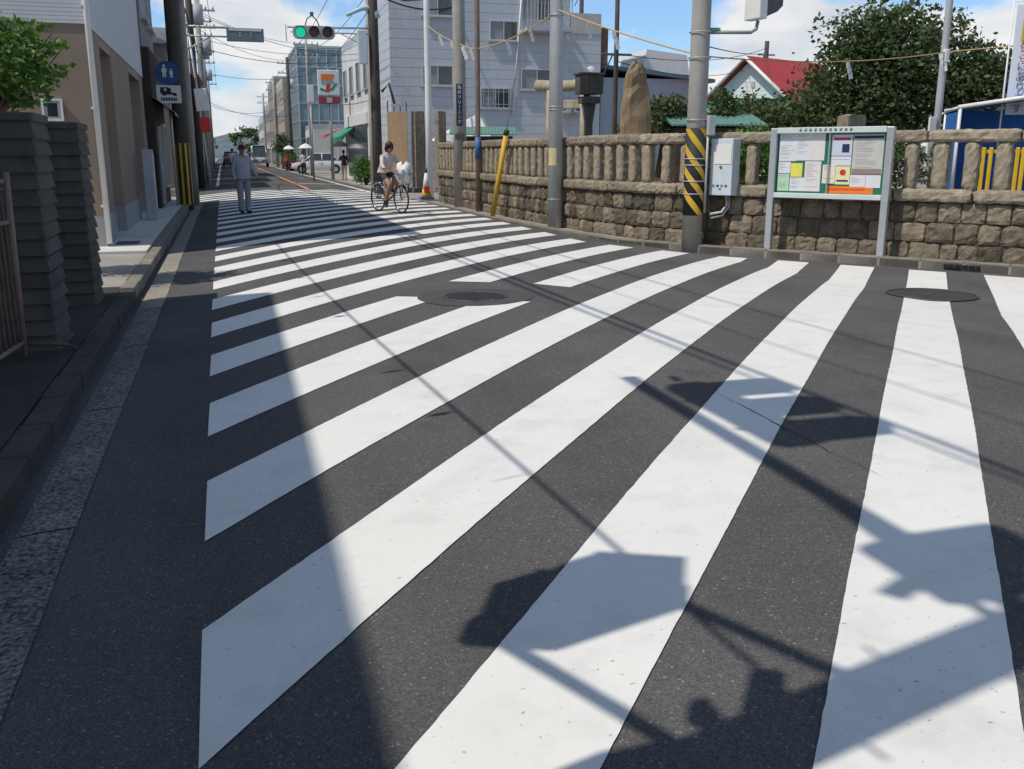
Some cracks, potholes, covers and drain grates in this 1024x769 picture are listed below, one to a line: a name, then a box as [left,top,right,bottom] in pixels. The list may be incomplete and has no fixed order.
manhole cover [417,289,534,306]
manhole cover [885,288,979,302]
crack [715,391,881,476]
